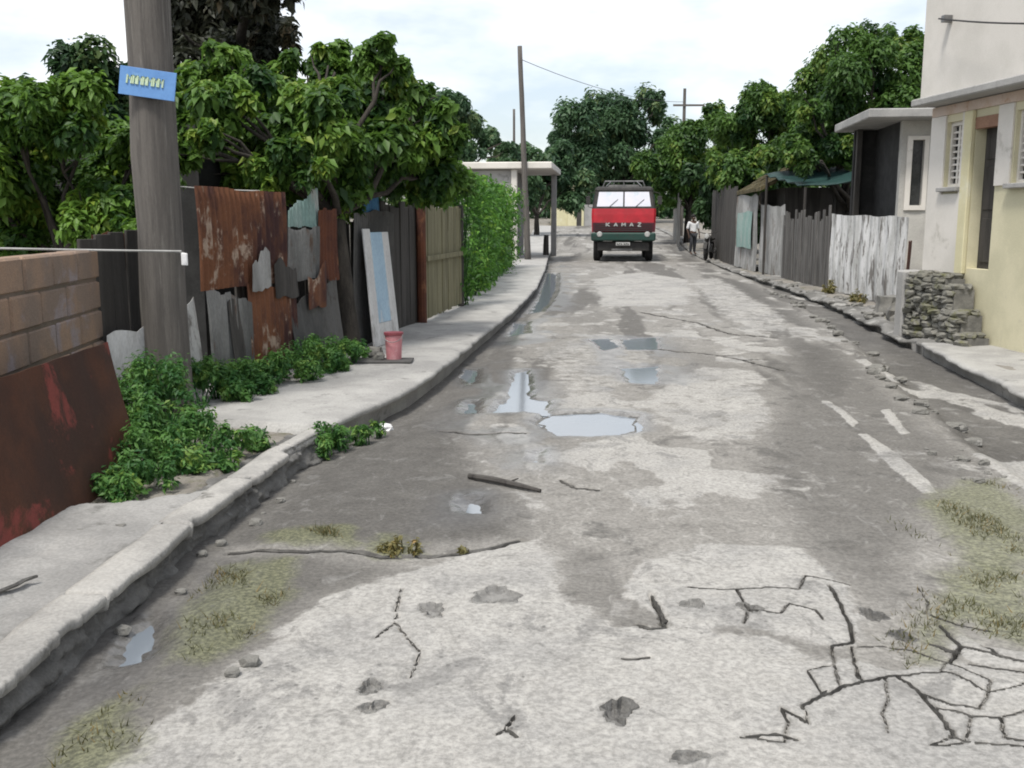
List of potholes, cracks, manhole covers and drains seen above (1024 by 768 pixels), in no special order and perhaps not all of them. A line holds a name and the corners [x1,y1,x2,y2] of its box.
crack [640,312,784,372]
crack [228,540,521,560]
crack [687,575,1024,748]
crack [375,590,421,678]
pothole [535,412,639,435]
